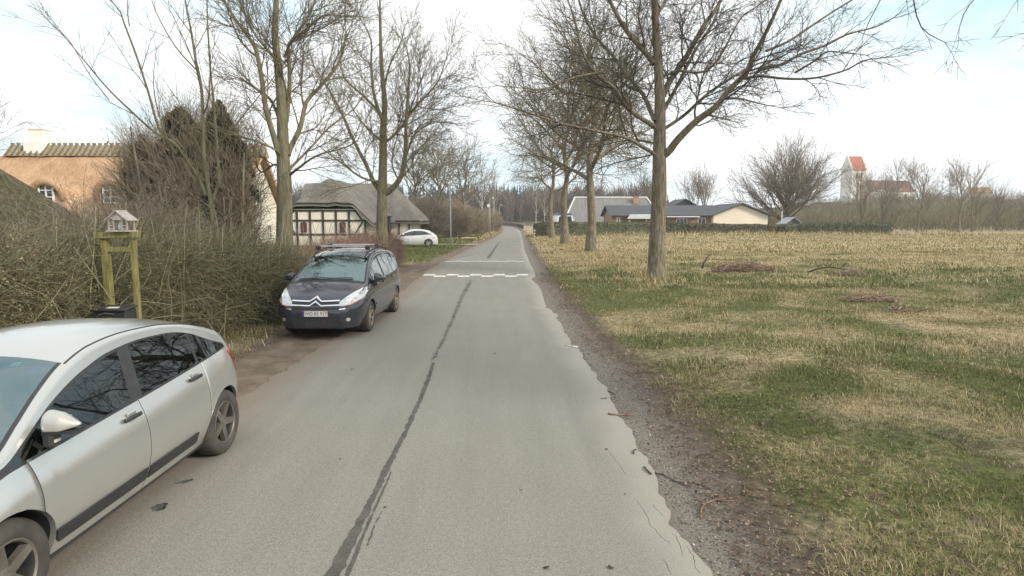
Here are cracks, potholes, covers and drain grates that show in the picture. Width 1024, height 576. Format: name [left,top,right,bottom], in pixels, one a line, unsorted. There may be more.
crack [634,498,702,575]
